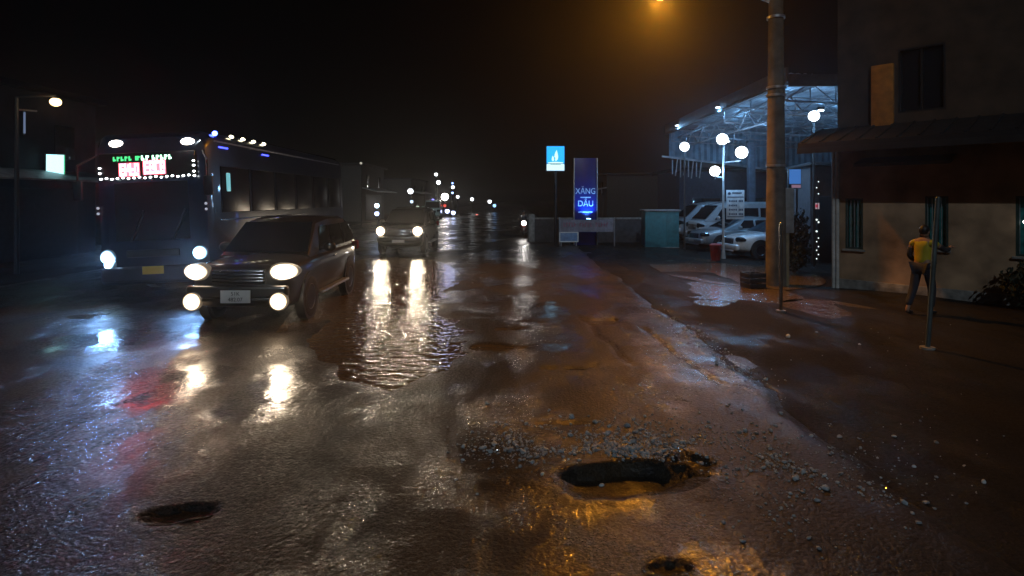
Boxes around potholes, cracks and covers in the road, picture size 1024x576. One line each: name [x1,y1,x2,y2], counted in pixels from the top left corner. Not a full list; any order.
pothole [664,451,717,480]
pothole [469,343,528,351]
pothole [138,504,220,526]
pothole [549,460,711,499]
pothole [641,559,696,576]
